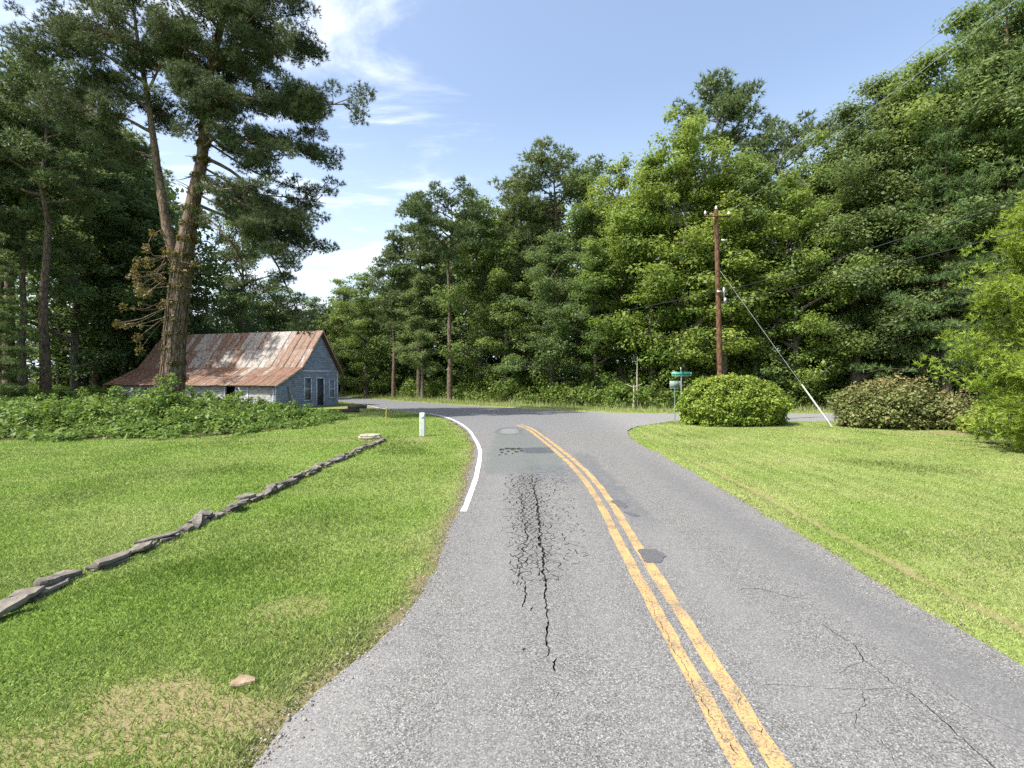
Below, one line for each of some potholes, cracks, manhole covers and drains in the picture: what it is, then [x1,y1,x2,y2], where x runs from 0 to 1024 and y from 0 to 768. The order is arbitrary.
crack [767,624,1021,768]
crack [498,474,588,708]
